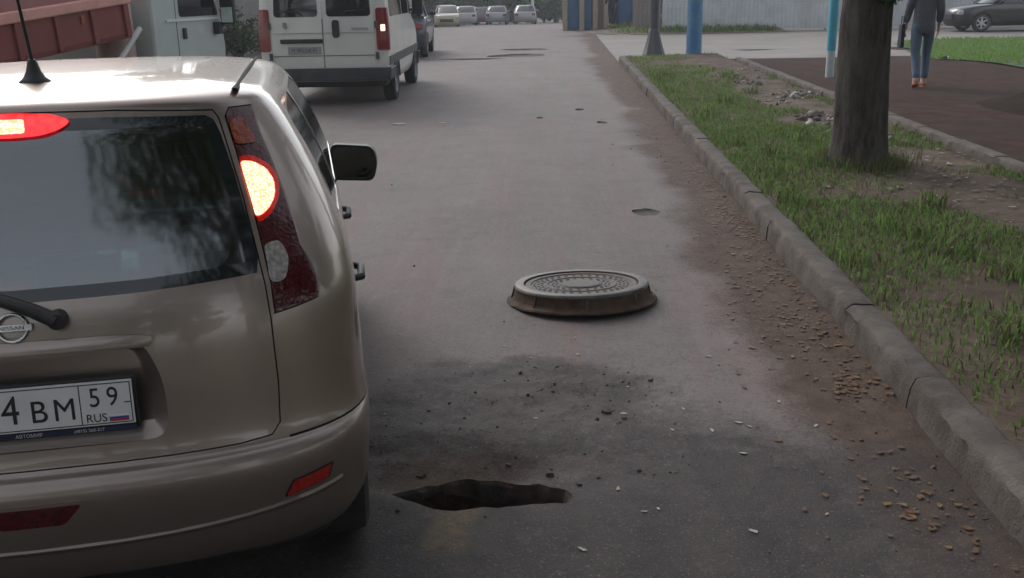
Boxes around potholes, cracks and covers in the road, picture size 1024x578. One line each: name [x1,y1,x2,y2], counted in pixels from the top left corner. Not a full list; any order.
pothole [632,208,660,216]
manhole cover [507,269,657,316]
pothole [392,479,573,511]
